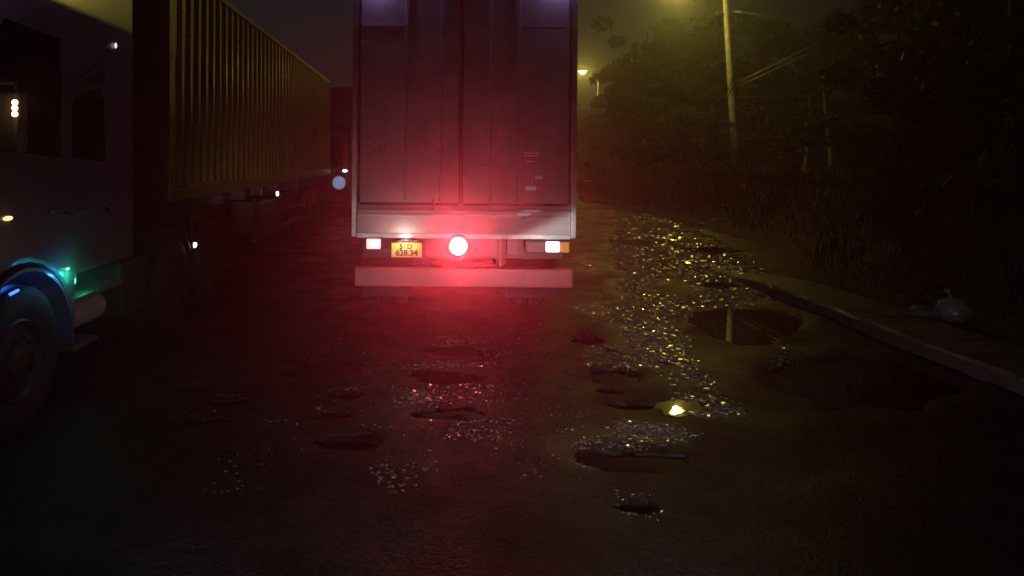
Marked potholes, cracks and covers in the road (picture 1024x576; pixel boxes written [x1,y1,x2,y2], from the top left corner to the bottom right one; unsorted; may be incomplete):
pothole [311,432,386,452]
pothole [606,401,655,410]
pothole [587,368,643,386]
pothole [409,405,488,421]
pothole [425,346,494,357]
pothole [309,411,355,420]
pothole [614,496,662,515]
pothole [205,398,257,407]
pothole [571,333,604,346]
pothole [409,369,487,385]
pothole [574,448,690,473]
pothole [325,391,366,399]
